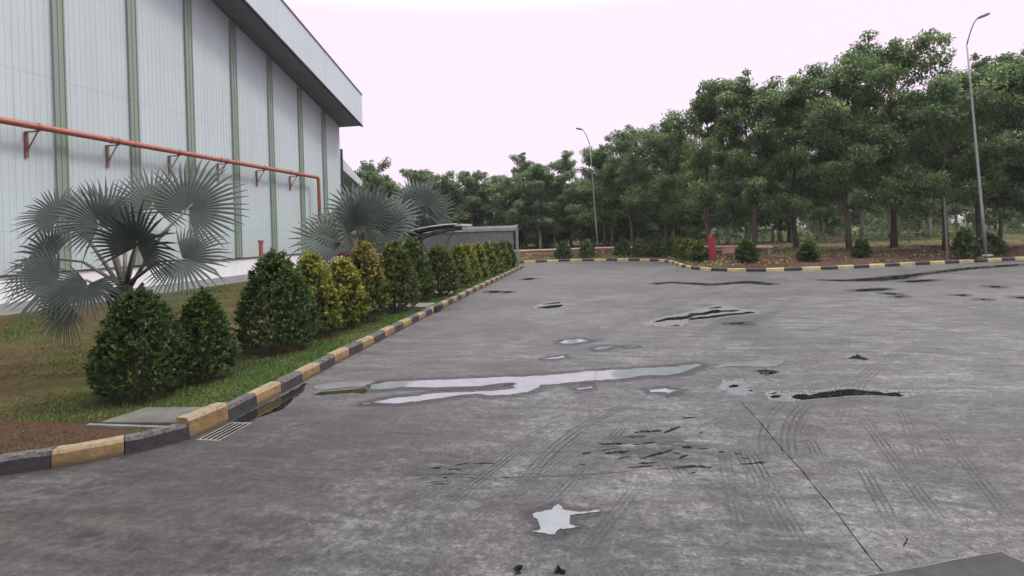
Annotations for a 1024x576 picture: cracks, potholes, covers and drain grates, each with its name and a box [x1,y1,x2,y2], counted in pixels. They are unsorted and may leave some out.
pothole [533,301,571,310]
crack [427,400,883,572]
pothole [713,377,762,395]
pothole [643,305,760,326]
drain grate [197,422,252,441]
pothole [762,386,923,402]
